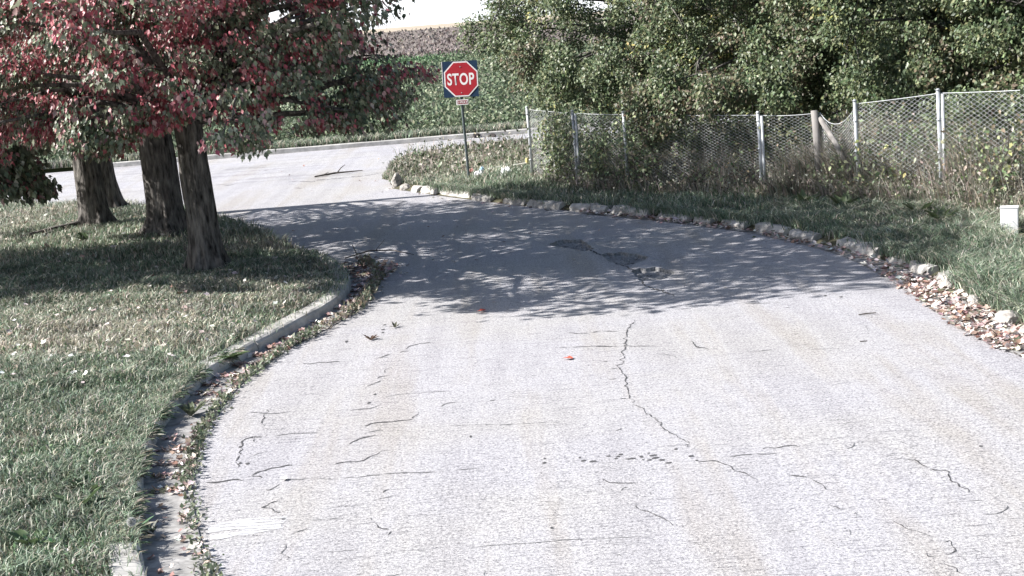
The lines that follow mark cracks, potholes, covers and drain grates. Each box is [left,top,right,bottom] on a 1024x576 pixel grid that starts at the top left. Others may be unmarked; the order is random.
pothole [549,239,595,251]
pothole [631,267,675,281]
crack [894,521,984,574]
crack [205,405,419,513]
pothole [601,252,648,265]
crack [909,460,1008,515]
crack [555,322,689,445]
